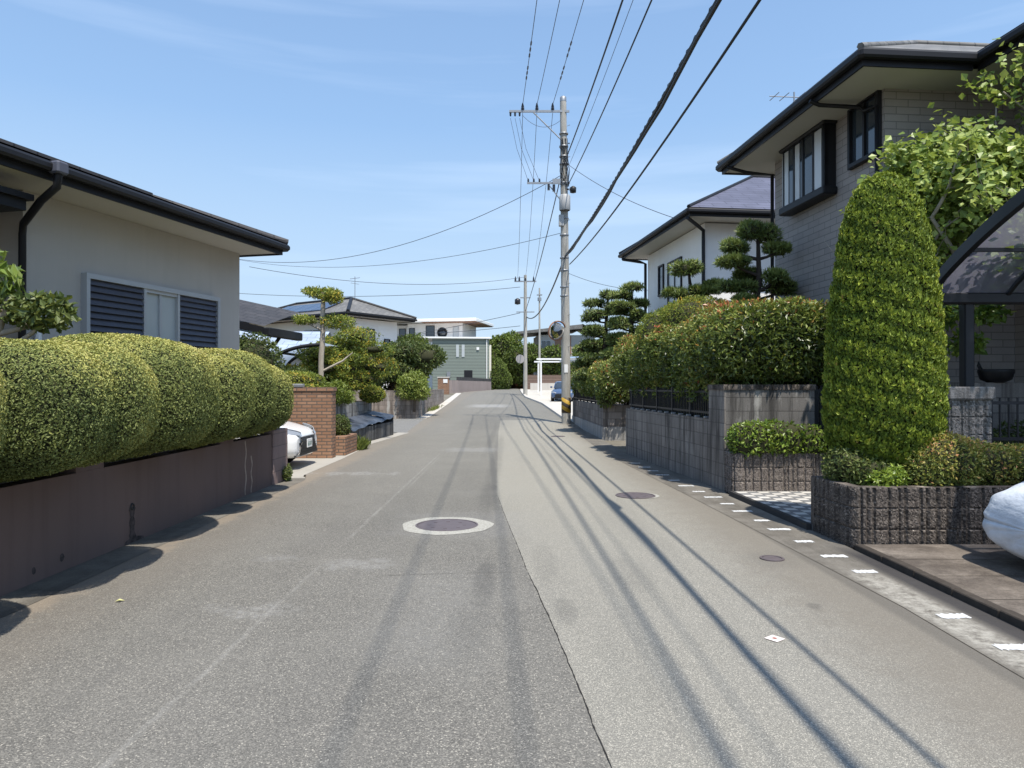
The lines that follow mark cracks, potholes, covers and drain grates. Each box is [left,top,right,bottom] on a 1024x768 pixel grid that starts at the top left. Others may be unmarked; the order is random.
manhole cover [403,517,494,535]
